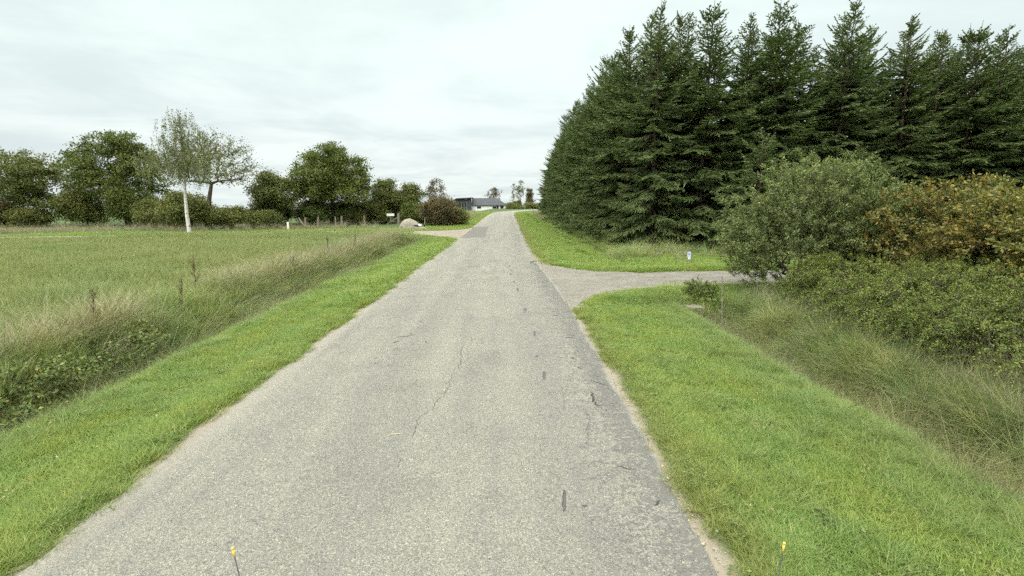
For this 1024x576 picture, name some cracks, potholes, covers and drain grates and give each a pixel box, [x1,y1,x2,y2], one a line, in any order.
crack [530,261,661,506]
crack [397,334,472,468]
